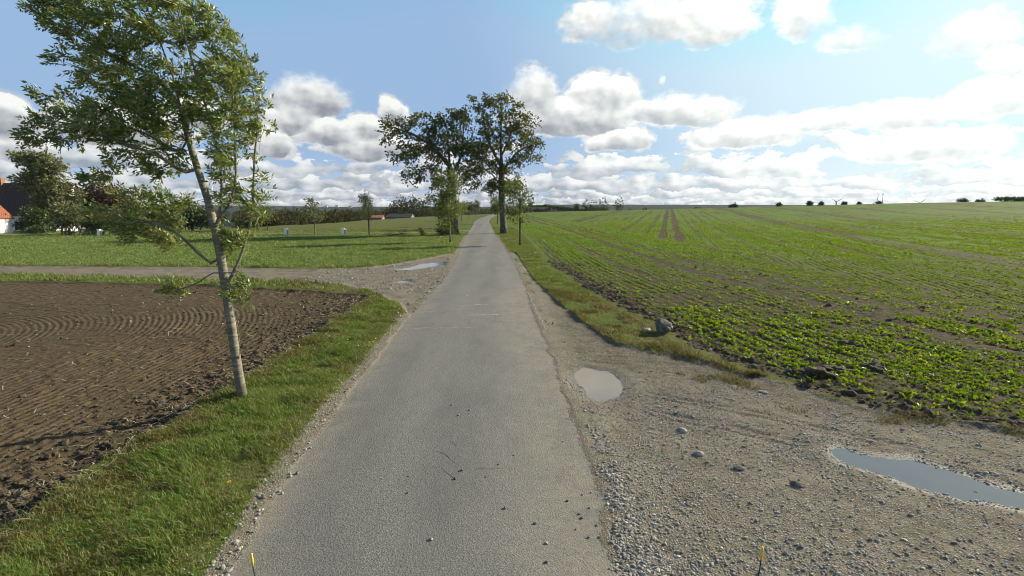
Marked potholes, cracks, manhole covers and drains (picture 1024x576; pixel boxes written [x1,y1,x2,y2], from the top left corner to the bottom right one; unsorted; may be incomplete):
pothole [389,261,449,270]
pothole [814,441,1024,514]
pothole [564,364,633,404]
